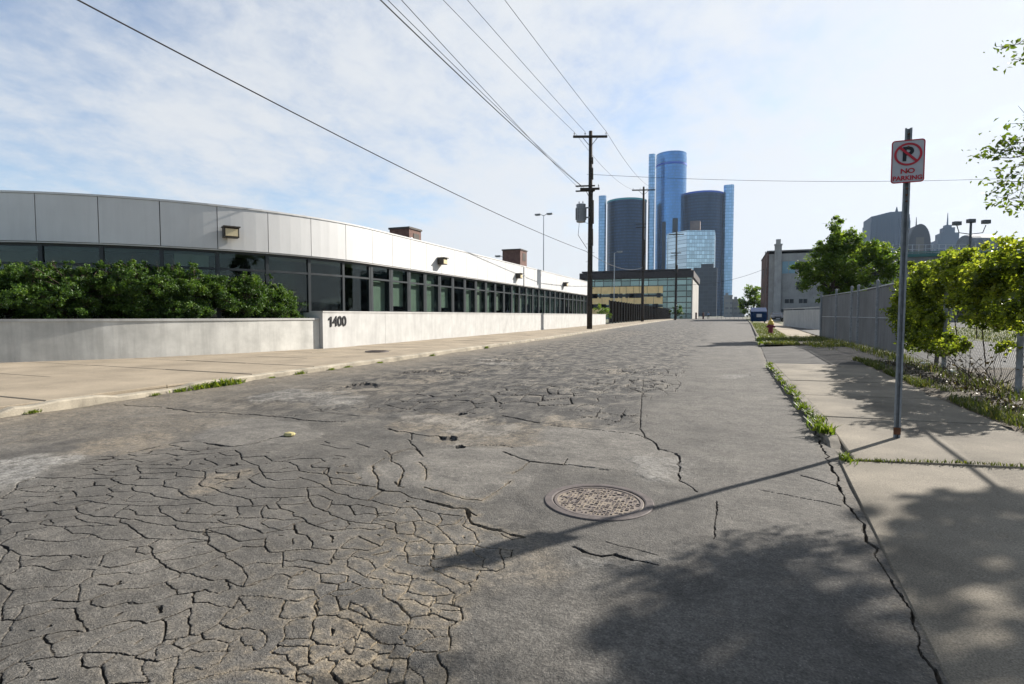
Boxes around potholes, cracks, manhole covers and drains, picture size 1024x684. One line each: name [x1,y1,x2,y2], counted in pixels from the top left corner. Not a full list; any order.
pothole [344,382,379,390]
manhole cover [544,484,654,522]
crack [0,358,719,684]
